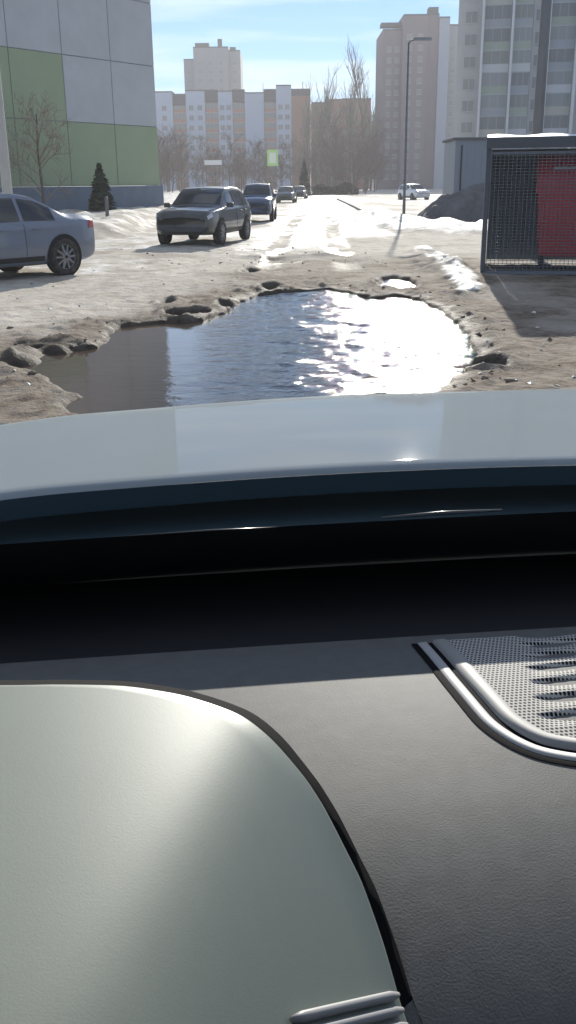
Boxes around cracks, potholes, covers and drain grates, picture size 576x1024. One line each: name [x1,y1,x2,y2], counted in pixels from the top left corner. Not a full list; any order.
pothole [472,352,519,367]
pothole [370,274,424,290]
pothole [252,279,286,290]
pothole [0,286,491,414]
